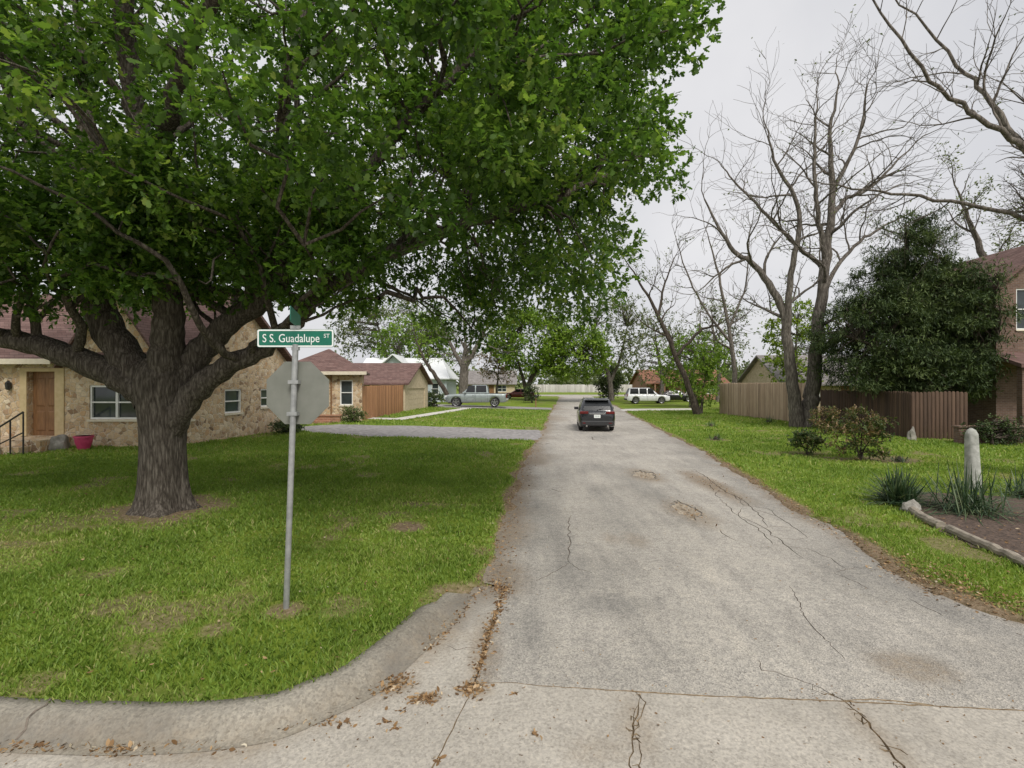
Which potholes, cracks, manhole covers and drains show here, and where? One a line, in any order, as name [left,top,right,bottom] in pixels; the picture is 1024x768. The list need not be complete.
crack [536,516,592,581]
pothole [669,500,703,521]
crack [15,698,51,740]
crack [696,470,867,588]
crack [790,587,844,658]
crack [759,661,908,768]
pothole [631,470,656,479]
crack [625,692,646,768]
